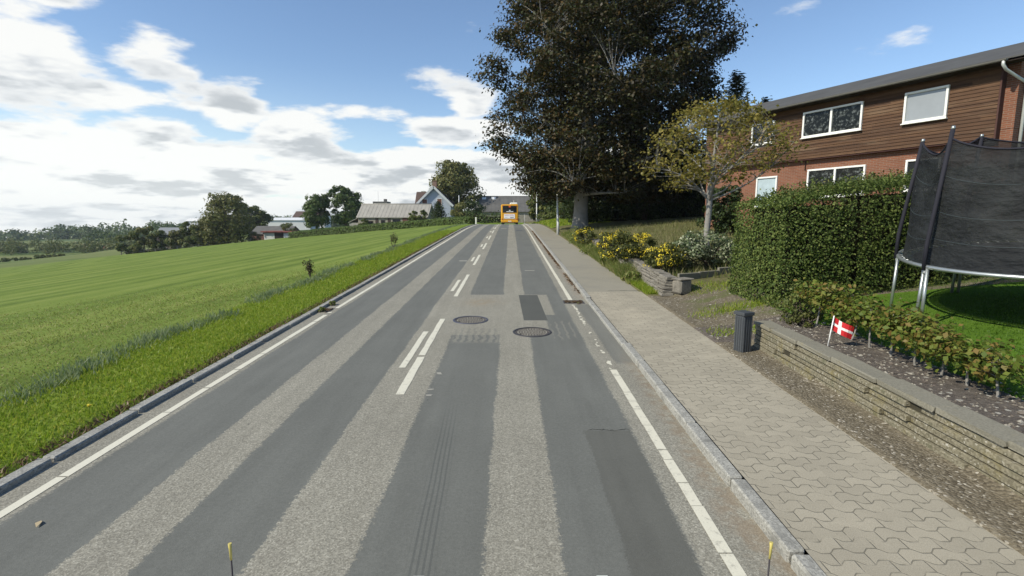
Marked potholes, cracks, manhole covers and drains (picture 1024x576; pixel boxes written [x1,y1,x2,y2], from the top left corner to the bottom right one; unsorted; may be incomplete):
manhole cover [513,327,552,337]
manhole cover [453,316,488,324]
